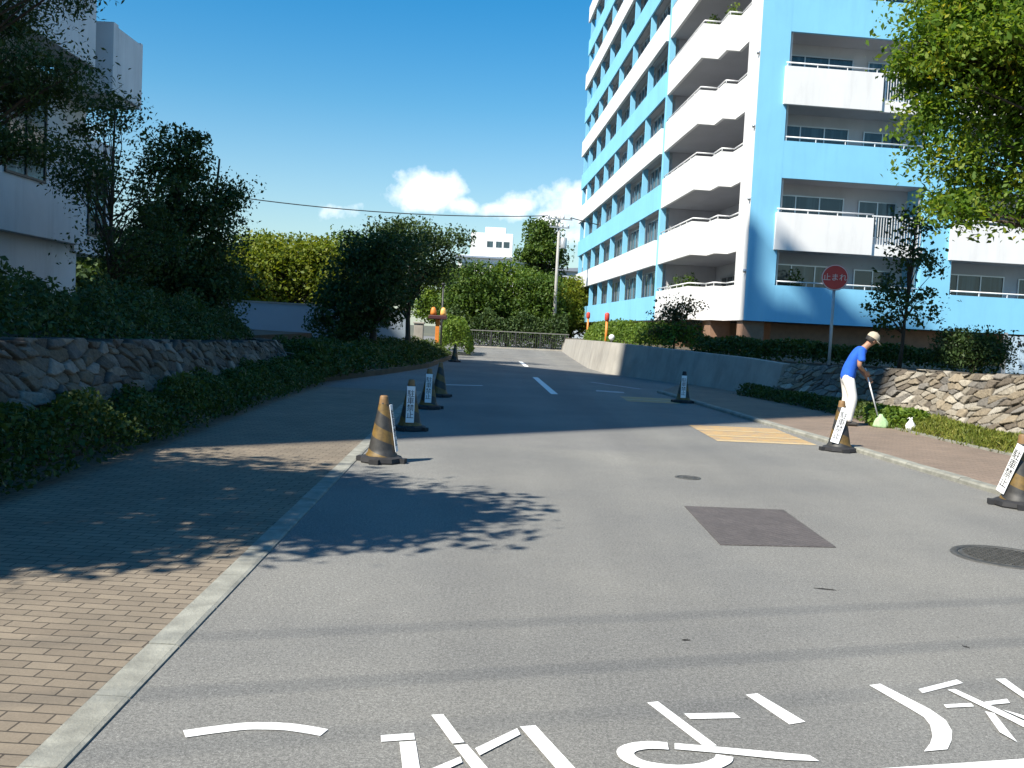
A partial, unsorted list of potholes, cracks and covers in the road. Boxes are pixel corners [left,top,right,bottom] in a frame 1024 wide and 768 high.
manhole cover [950,545,1024,570]
